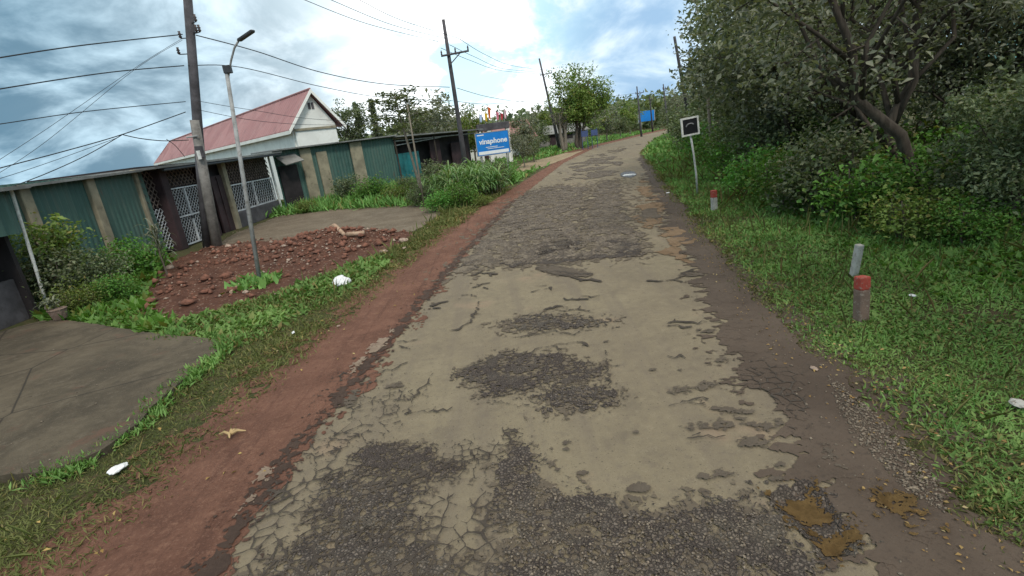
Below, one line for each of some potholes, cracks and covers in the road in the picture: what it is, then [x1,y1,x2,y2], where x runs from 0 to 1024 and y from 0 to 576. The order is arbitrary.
pothole [409,182,615,285]
pothole [437,347,613,404]
pothole [346,437,469,489]
pothole [477,308,626,337]
crack [228,339,524,576]
pothole [556,178,666,269]
pothole [460,435,840,576]
crack [429,264,498,330]
